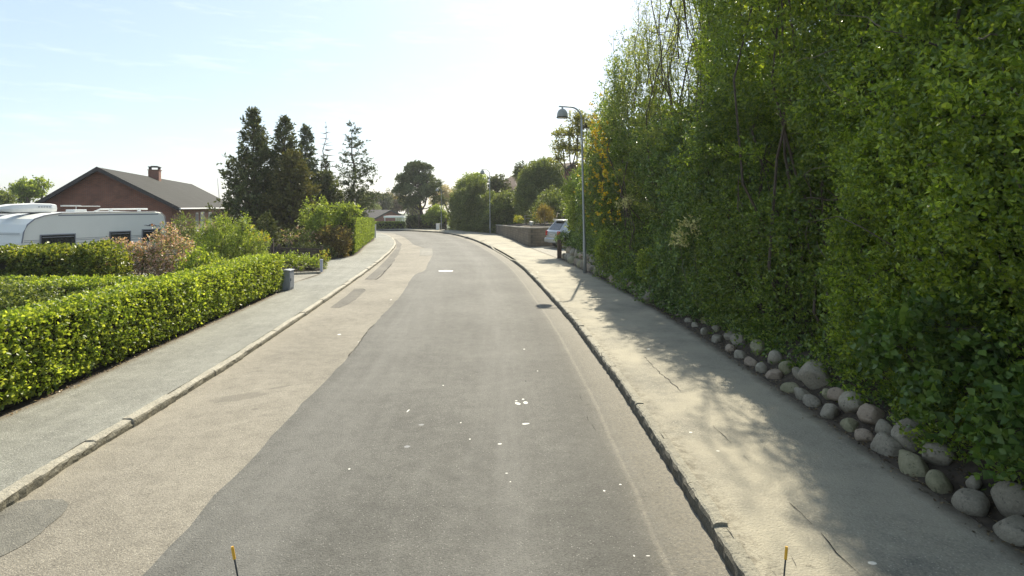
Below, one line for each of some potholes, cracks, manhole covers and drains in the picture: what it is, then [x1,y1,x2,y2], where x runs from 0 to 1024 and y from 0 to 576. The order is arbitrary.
crack [646,358,854,569]
